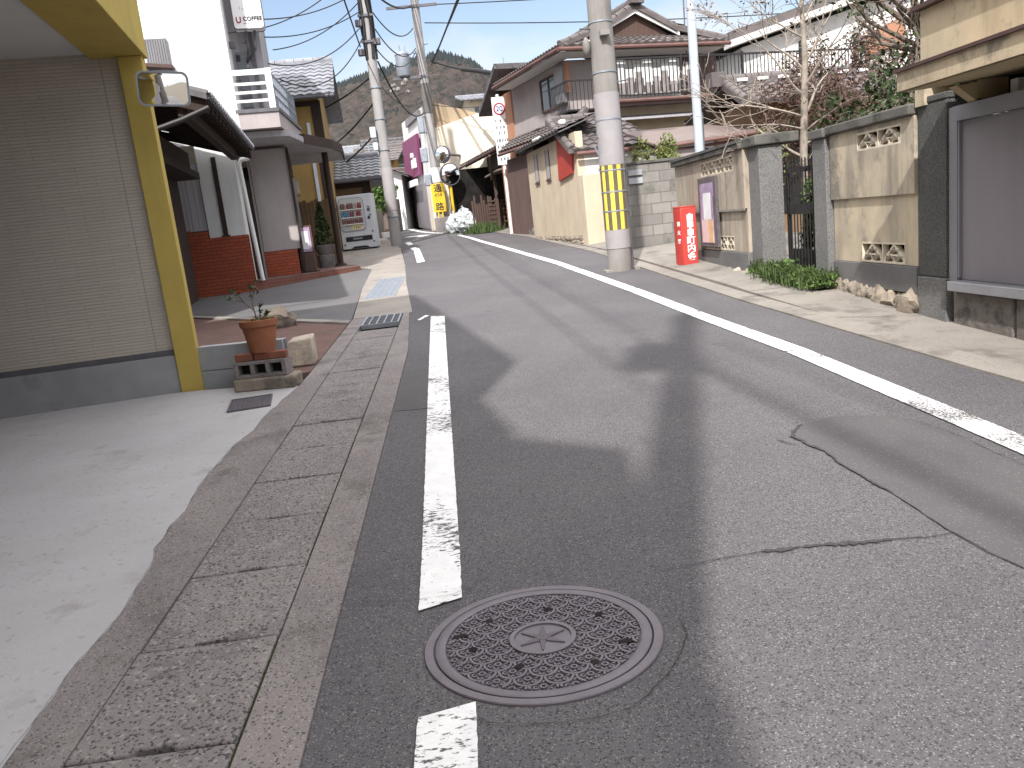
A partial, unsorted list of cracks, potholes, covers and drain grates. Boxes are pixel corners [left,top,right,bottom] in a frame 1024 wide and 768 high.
manhole cover [424,585,664,707]
crack [659,531,955,570]
drain grate [361,313,402,331]
